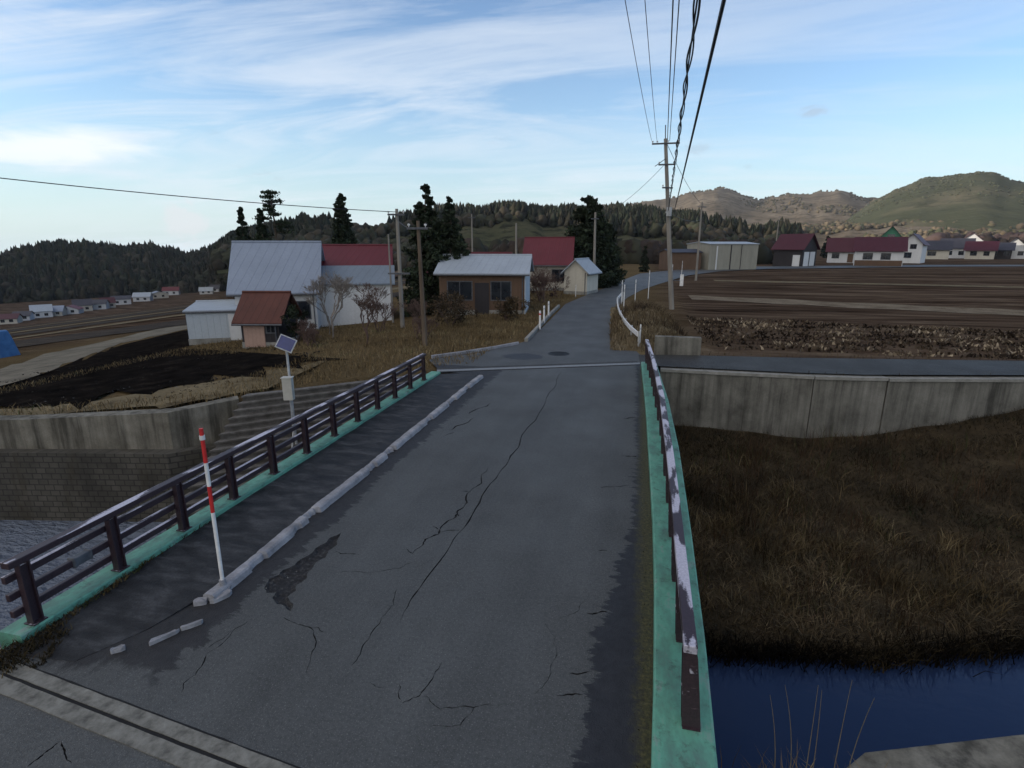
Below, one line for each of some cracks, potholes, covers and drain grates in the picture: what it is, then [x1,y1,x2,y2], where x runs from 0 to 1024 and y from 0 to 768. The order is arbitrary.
crack [27,741,72,767]
crack [336,377,558,665]
crack [283,617,323,671]
crack [398,664,501,727]
crack [183,624,244,689]
crack [533,603,607,696]
